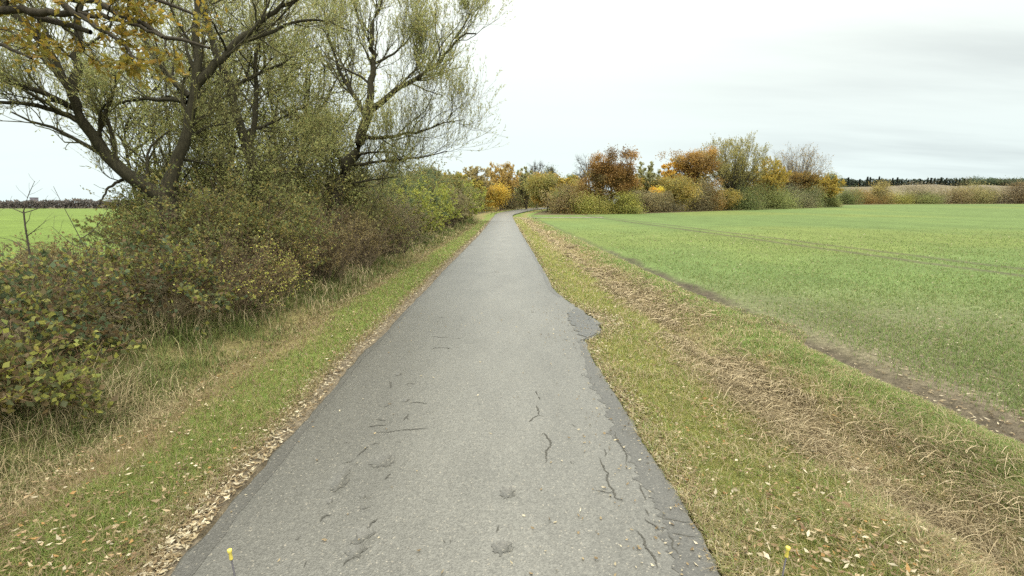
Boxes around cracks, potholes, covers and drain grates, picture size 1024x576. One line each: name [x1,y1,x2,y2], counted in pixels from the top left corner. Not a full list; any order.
crack [530,391,552,460]
crack [599,432,696,568]
crack [343,402,427,462]
